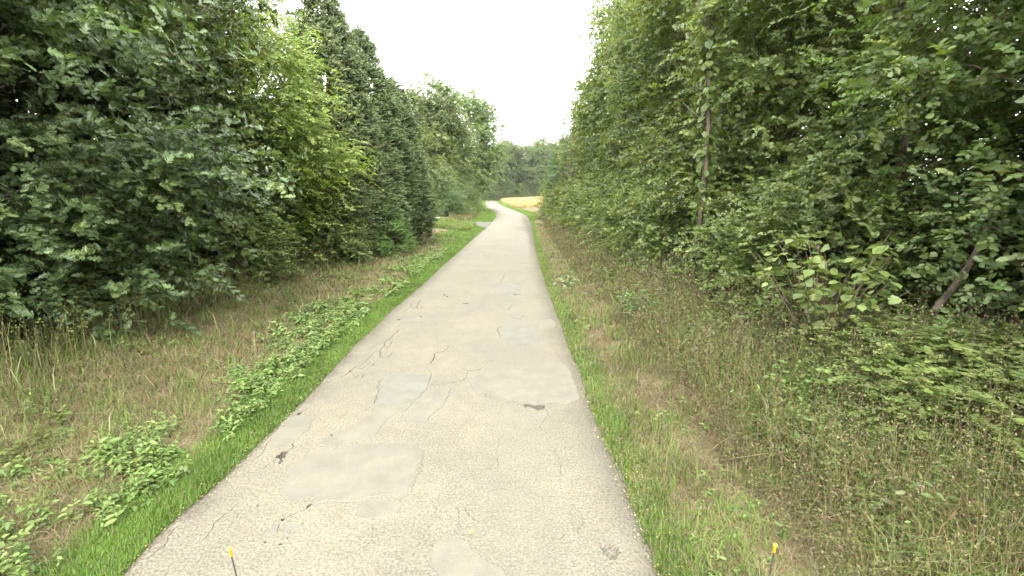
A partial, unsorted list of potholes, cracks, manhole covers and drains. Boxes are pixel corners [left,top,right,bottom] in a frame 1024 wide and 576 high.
crack [334,331,398,404]
